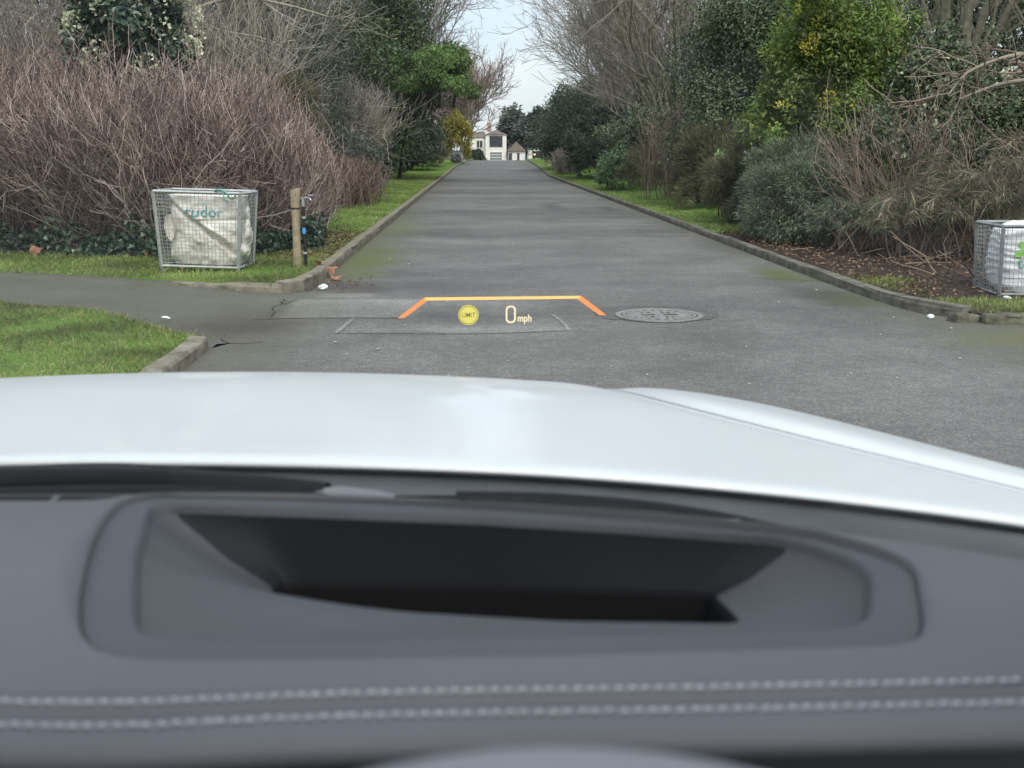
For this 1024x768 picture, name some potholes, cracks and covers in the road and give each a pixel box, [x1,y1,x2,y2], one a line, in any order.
manhole cover [615,308,704,323]
